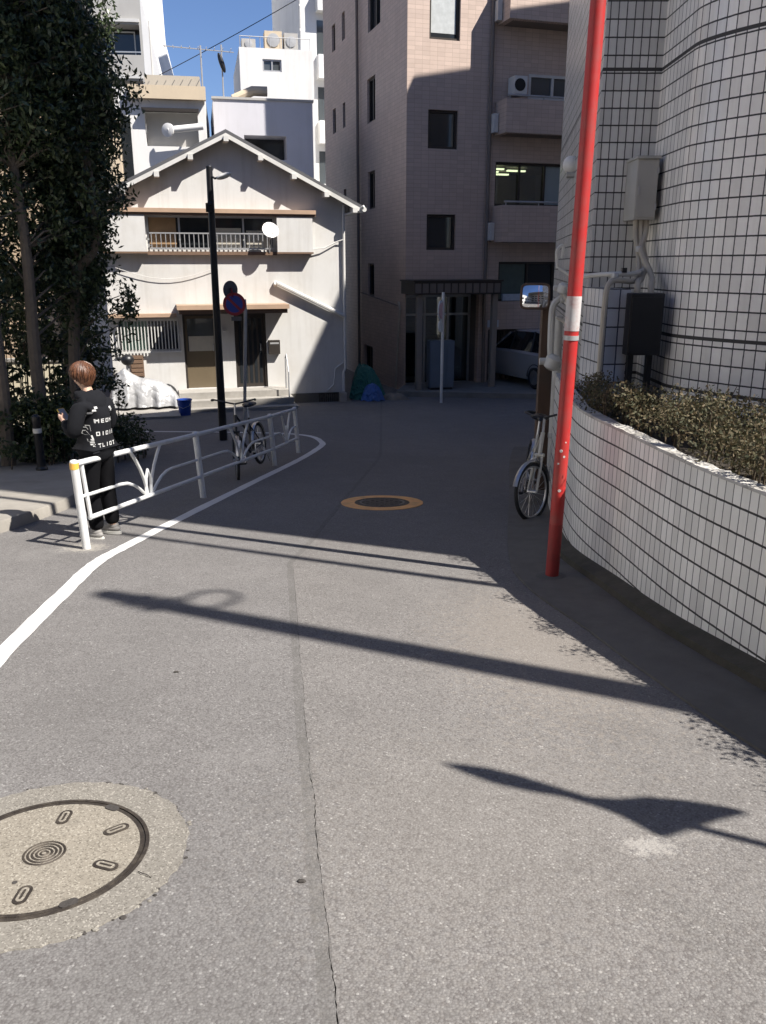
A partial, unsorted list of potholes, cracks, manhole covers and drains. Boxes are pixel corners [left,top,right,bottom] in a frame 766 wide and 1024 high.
manhole cover [0,782,192,954]
manhole cover [341,495,423,510]
